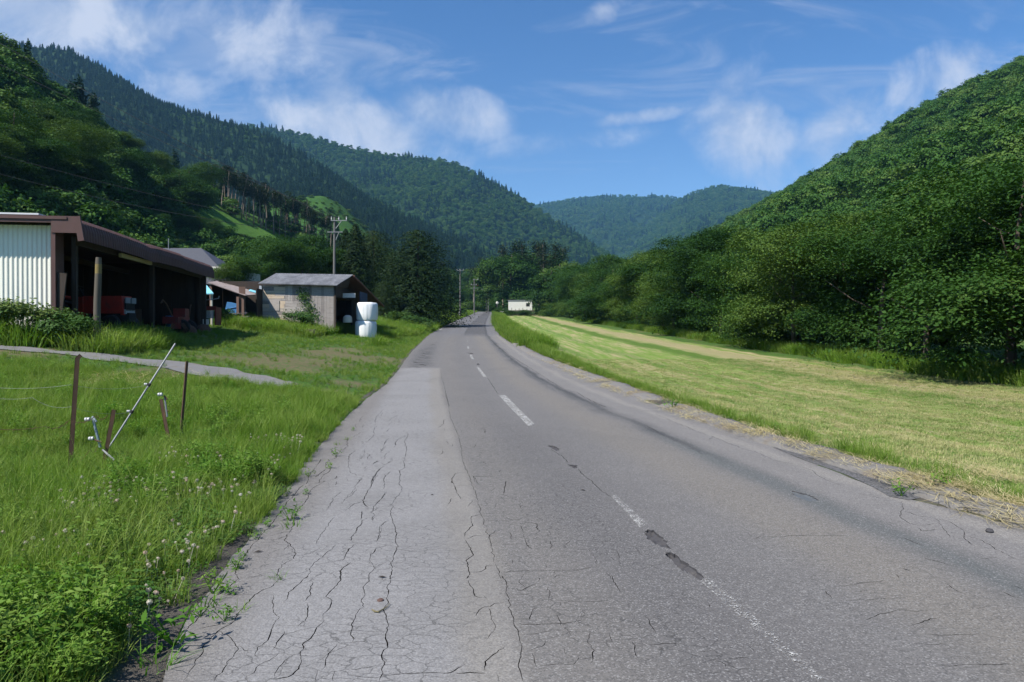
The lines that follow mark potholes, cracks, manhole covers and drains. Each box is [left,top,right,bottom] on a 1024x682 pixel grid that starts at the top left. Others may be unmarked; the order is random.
crack [185,409,641,681]
crack [632,587,754,673]
crack [751,523,842,539]
crack [826,494,1023,666]
